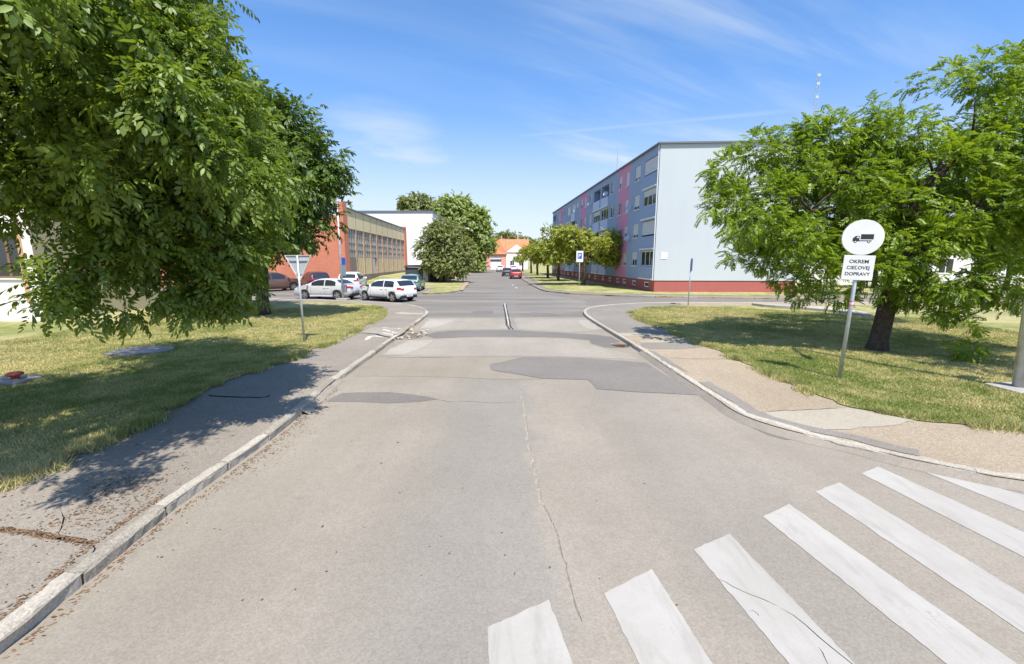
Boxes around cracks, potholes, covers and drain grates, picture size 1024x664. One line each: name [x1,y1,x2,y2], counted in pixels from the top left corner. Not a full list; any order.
crack [437,389,582,621]
